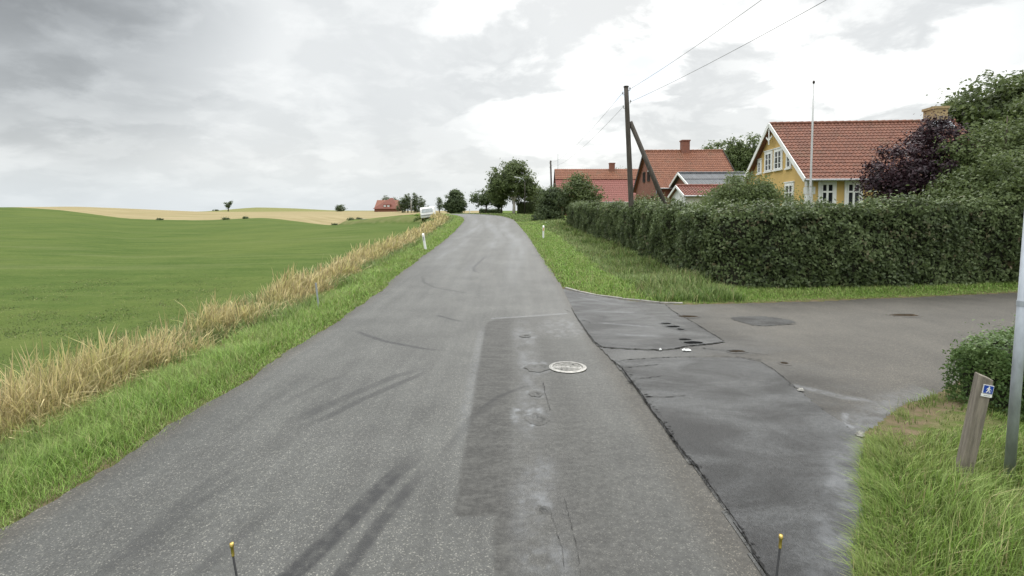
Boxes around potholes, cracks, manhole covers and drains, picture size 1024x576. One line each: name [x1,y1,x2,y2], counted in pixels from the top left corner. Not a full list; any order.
manhole cover [549,361,587,374]
